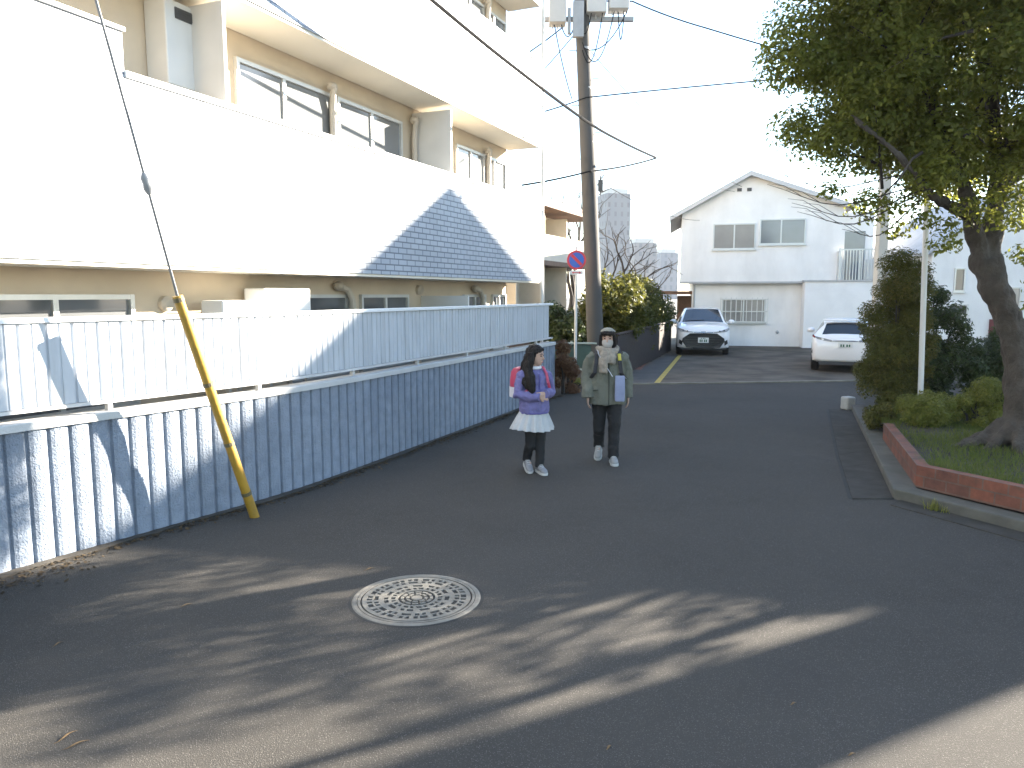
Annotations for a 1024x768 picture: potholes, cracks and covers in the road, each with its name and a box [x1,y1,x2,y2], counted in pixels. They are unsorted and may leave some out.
manhole cover [348,574,484,628]
